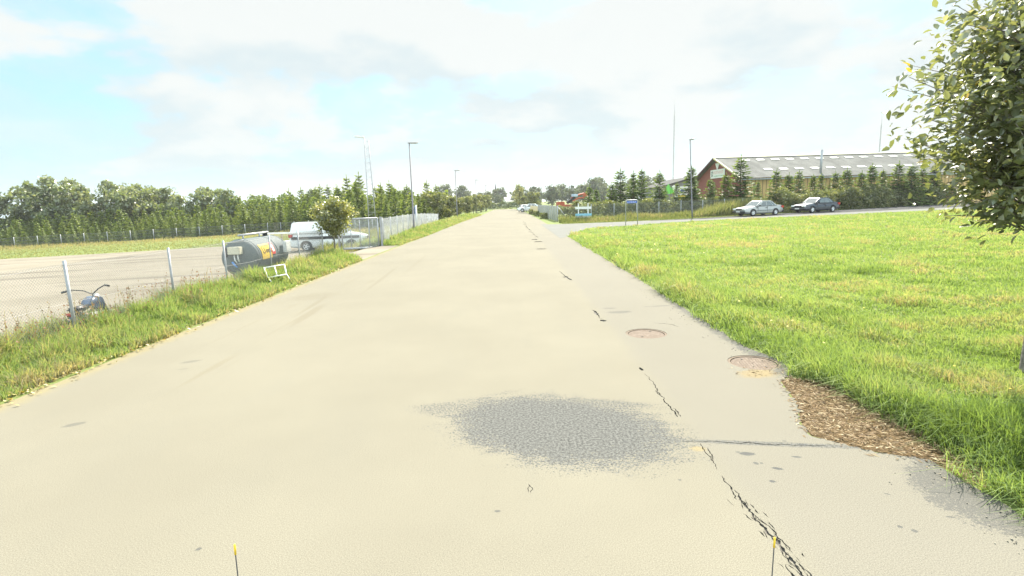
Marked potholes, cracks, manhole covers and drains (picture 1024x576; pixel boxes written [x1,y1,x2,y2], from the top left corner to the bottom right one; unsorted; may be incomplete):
crack [646,375,681,417]
manhole cover [727,355,781,370]
manhole cover [626,329,667,338]
crack [686,441,826,576]
